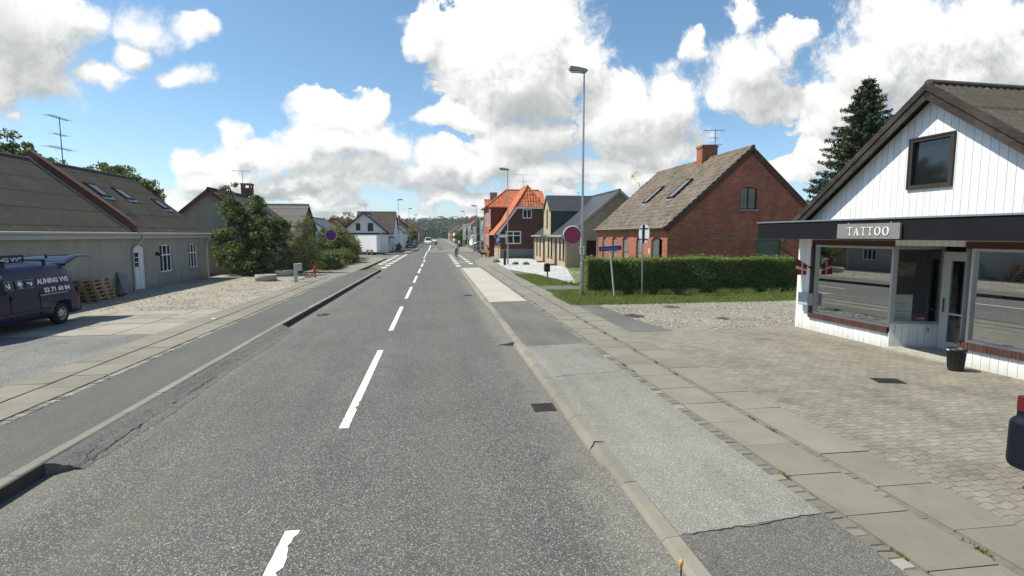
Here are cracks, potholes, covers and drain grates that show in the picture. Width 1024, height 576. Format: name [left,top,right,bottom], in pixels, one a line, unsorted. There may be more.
drain grate [531,403,557,412]
